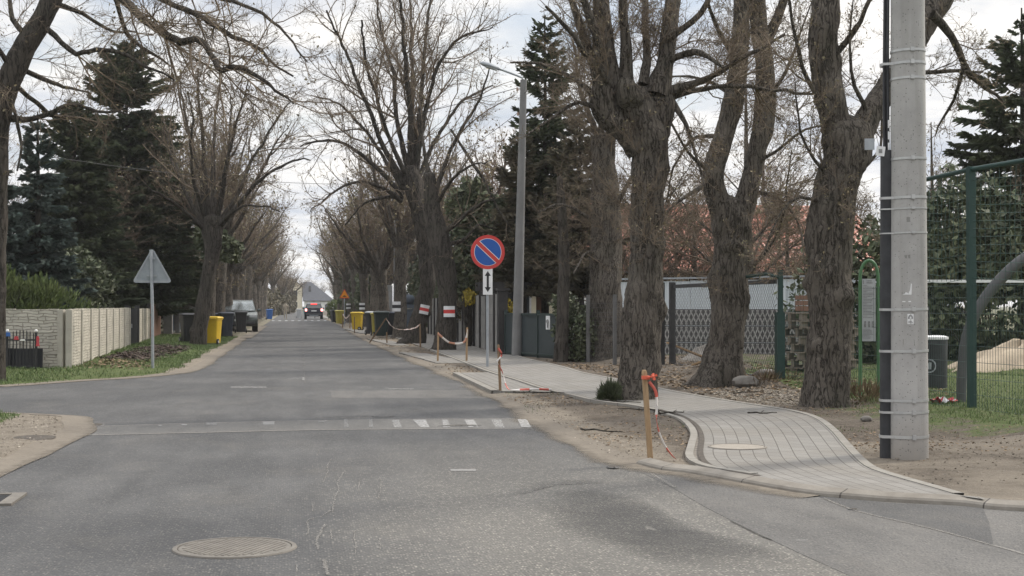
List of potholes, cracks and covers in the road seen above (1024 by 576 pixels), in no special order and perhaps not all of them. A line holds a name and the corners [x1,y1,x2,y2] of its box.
drain grate [0,492,27,506]
manhole cover [172,537,298,559]
crack [307,462,359,575]
